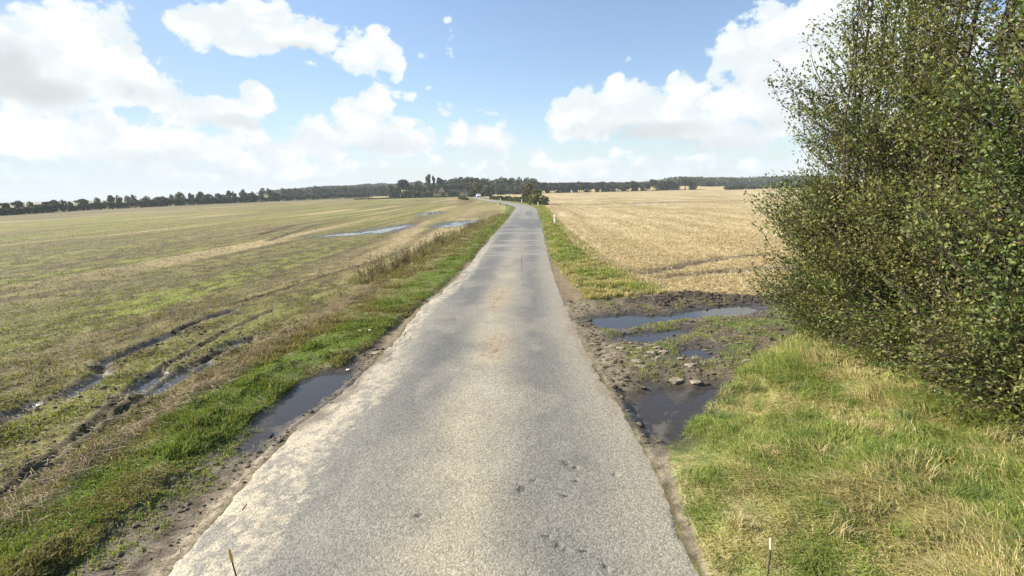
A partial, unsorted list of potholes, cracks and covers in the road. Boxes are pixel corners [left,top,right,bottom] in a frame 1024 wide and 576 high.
pothole [556,458,574,469]
pothole [547,538,567,553]
pothole [512,482,531,497]
pothole [558,545,575,557]
